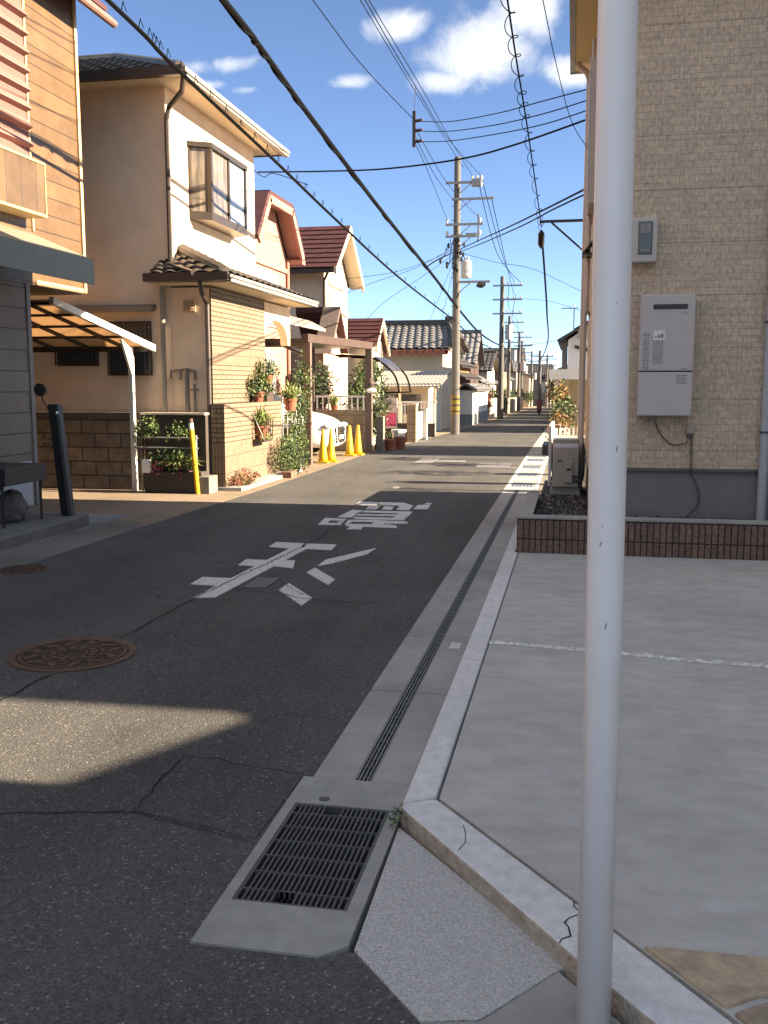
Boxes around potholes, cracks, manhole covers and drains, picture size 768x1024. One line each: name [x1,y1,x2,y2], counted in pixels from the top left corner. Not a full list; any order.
drain grate [355,491,519,781]
crack [559,901,578,943]
crack [0,673,55,701]
crack [0,755,304,840]
manhole cover [7,637,137,673]
manhole cover [242,577,281,589]
manhole cover [0,564,50,574]
drain grate [190,776,410,960]
